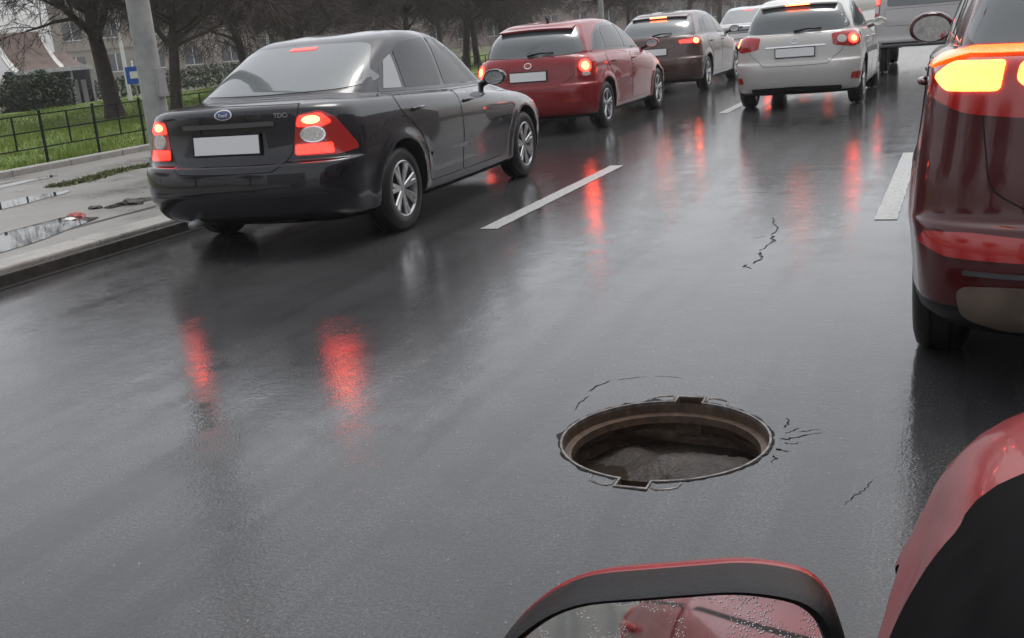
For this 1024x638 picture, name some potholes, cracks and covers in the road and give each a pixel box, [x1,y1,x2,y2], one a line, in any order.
crack [771,418,822,462]
crack [742,218,779,269]
manhole cover [556,395,775,490]
crack [575,376,677,410]
